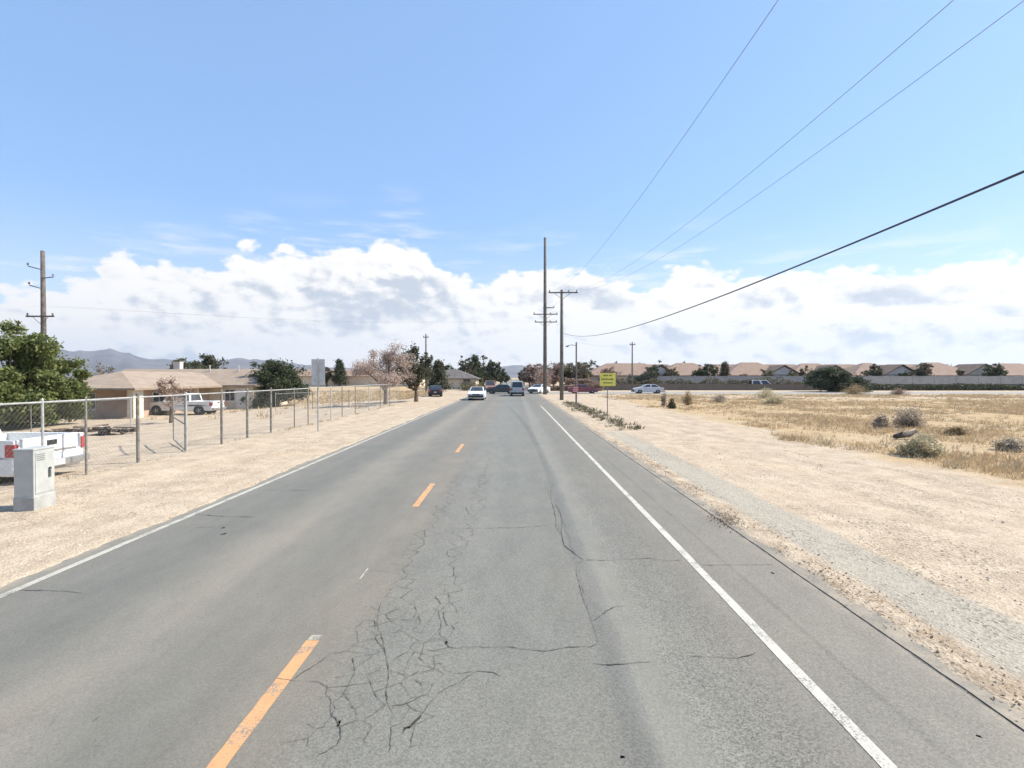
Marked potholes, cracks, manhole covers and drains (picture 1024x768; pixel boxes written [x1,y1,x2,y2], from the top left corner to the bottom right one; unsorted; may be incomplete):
crack [279,456,649,757]
